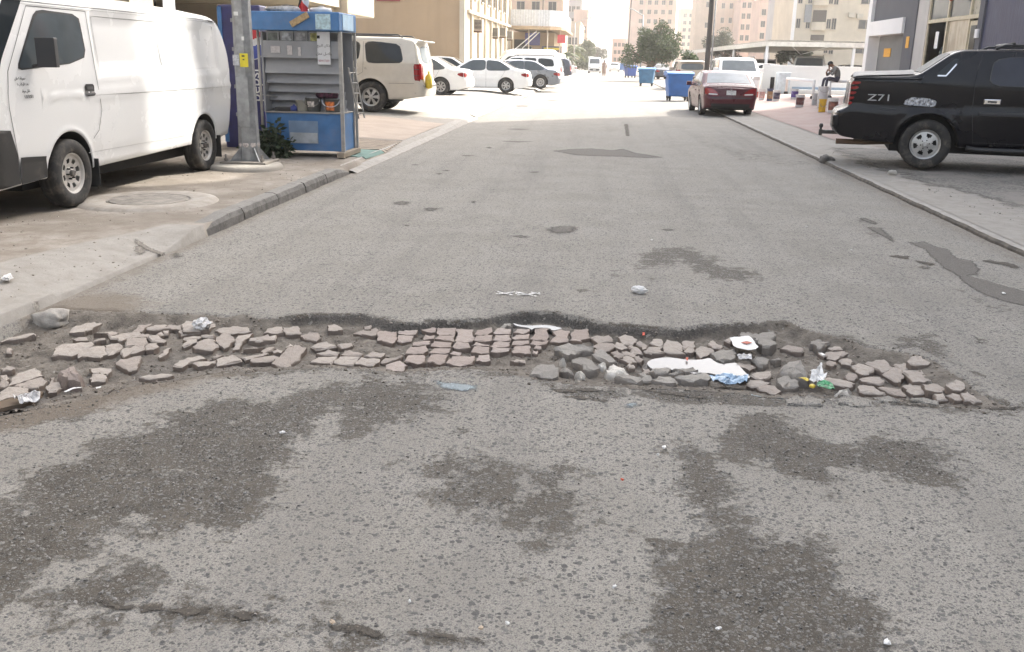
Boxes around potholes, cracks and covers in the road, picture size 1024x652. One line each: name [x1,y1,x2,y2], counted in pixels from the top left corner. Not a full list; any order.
crack [93,599,276,621]
manhole cover [76,191,219,213]
pothole [0,308,1016,414]
